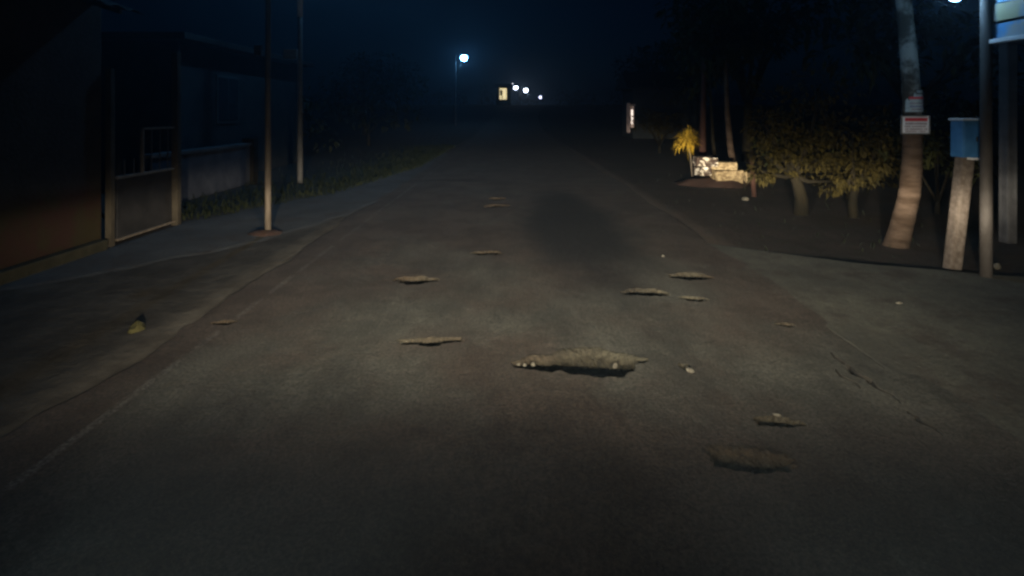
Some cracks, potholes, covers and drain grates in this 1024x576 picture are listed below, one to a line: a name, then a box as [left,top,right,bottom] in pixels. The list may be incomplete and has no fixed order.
pothole [511,347,649,378]
crack [831,353,943,436]
pothole [391,275,439,285]
pothole [666,272,715,281]
pothole [396,337,463,347]
pothole [701,444,798,475]
pothole [753,416,807,428]
pothole [620,287,671,296]
